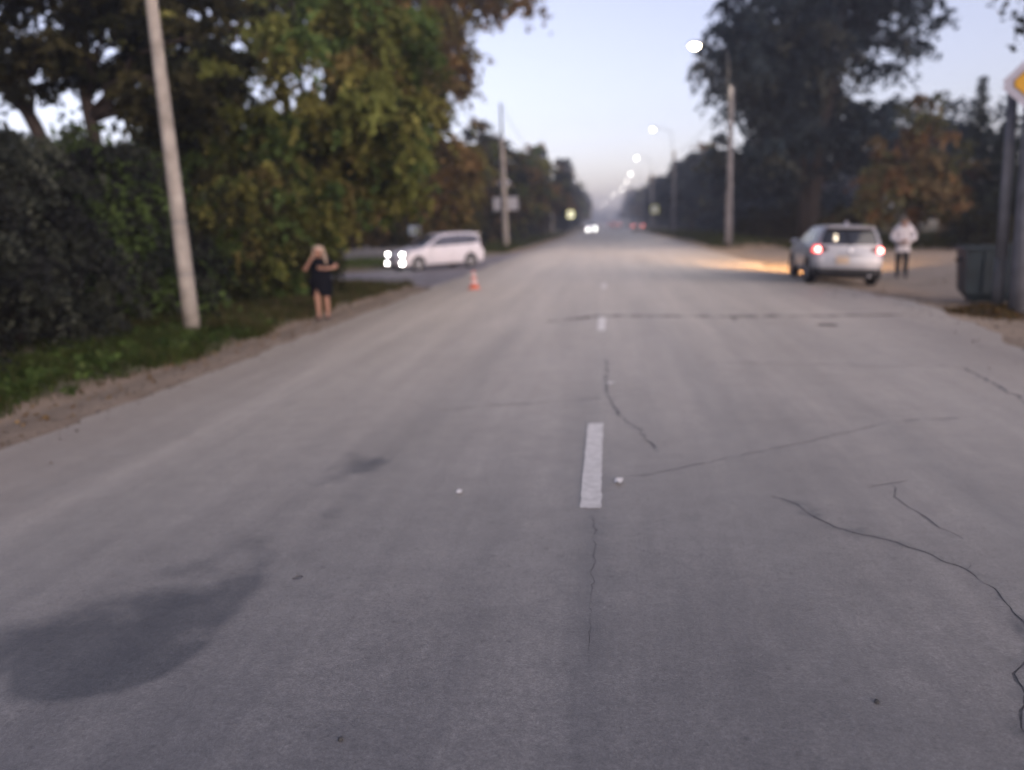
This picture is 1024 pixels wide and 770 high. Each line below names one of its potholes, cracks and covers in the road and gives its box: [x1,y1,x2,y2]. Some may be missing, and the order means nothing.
crack [441,359,657,451]
crack [633,418,949,476]
crack [941,365,1024,402]
crack [773,480,1024,732]
